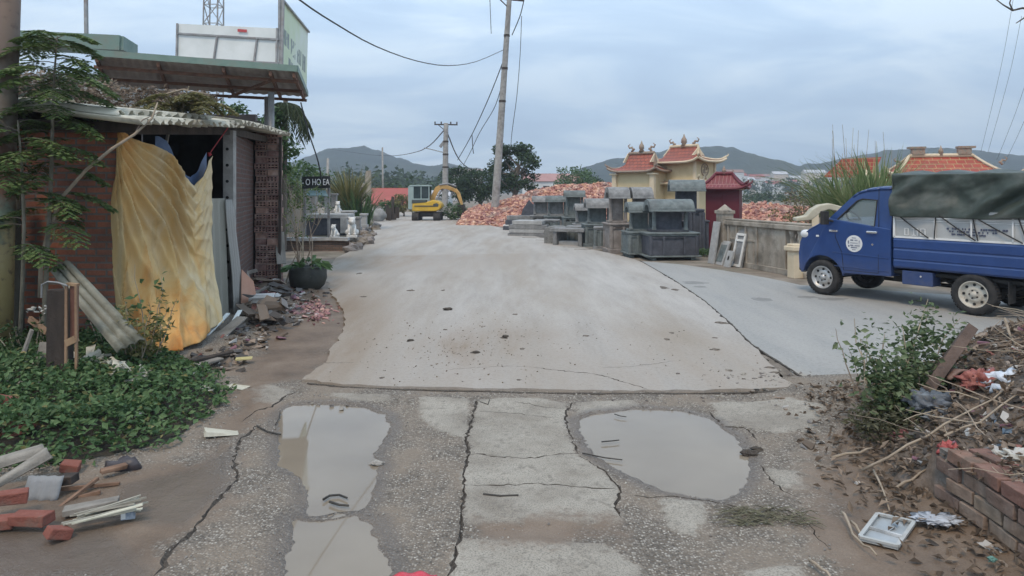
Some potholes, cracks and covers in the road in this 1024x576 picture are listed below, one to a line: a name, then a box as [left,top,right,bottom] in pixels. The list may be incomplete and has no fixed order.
crack [154,361,777,576]
pothole [275,401,394,520]
pothole [280,513,395,576]
pothole [575,406,753,500]
